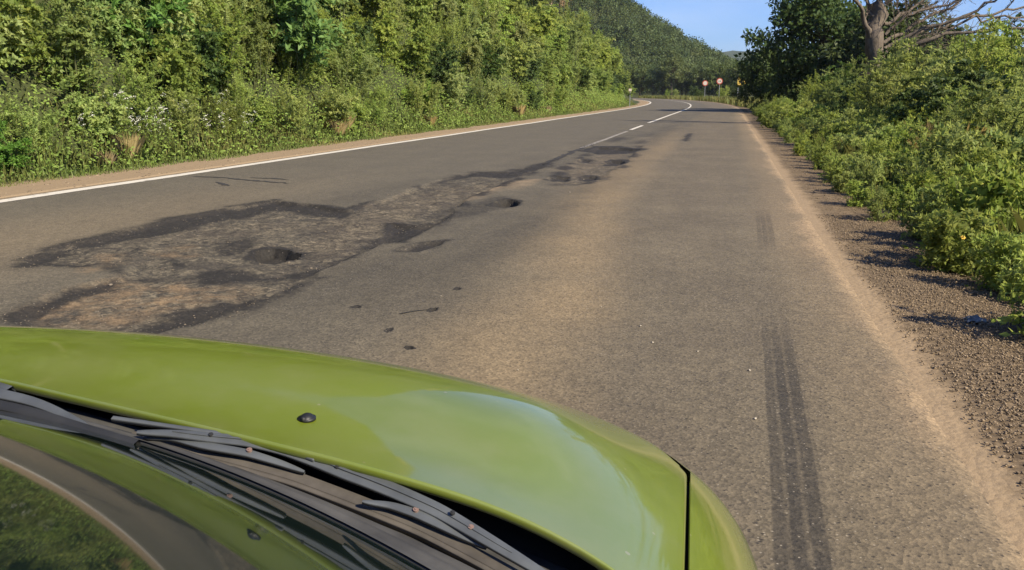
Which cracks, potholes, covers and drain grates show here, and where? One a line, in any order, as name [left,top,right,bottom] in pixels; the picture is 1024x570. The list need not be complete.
crack [196,176,288,186]
pothole [556,146,642,186]
